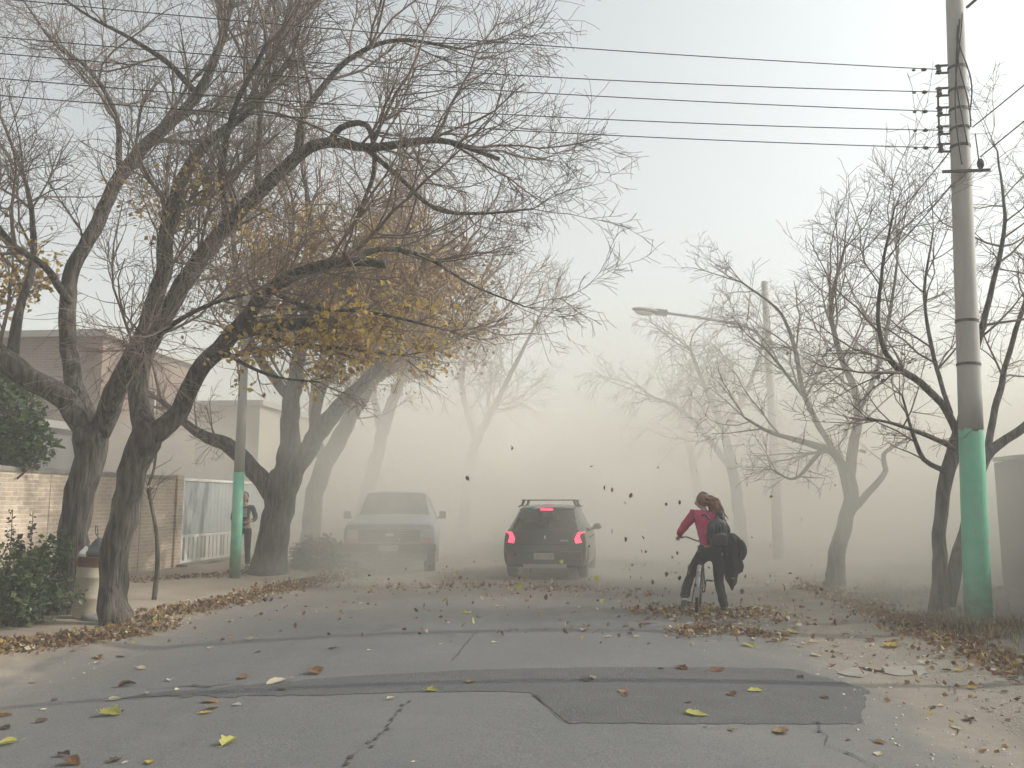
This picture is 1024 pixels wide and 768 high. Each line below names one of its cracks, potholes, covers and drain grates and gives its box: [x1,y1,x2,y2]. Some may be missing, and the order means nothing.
crack [343,700,411,766]
crack [812,720,877,766]
